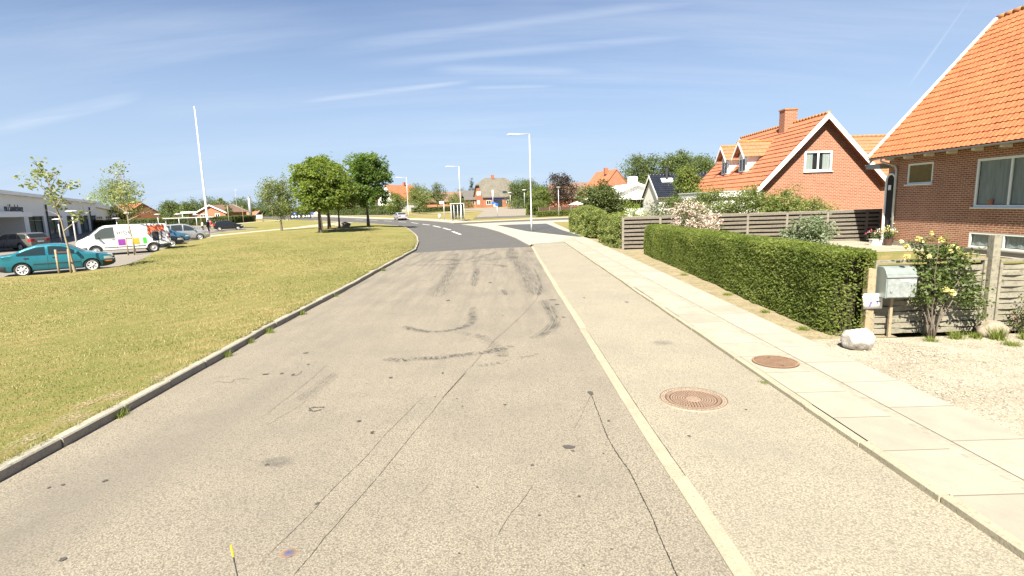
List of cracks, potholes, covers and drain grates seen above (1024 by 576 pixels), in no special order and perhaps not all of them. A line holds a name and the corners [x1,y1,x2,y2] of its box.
crack [575,395,678,576]
crack [258,294,539,573]
manhole cover [659,387,729,412]
manhole cover [752,355,800,369]
